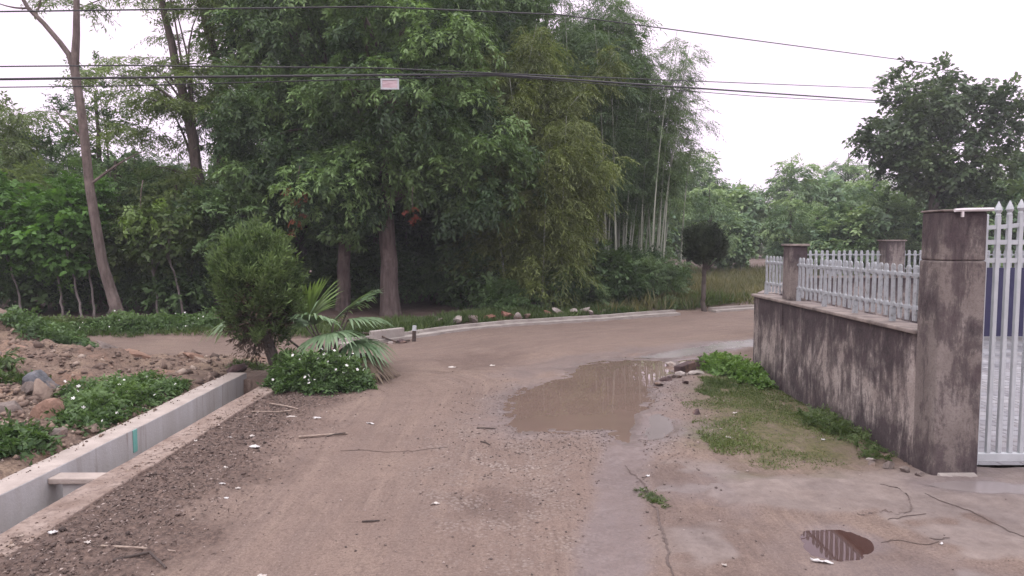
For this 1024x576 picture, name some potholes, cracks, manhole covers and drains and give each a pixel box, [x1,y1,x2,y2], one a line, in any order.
crack [626,466,674,576]
pothole [791,525,884,563]
crack [857,484,1024,537]
